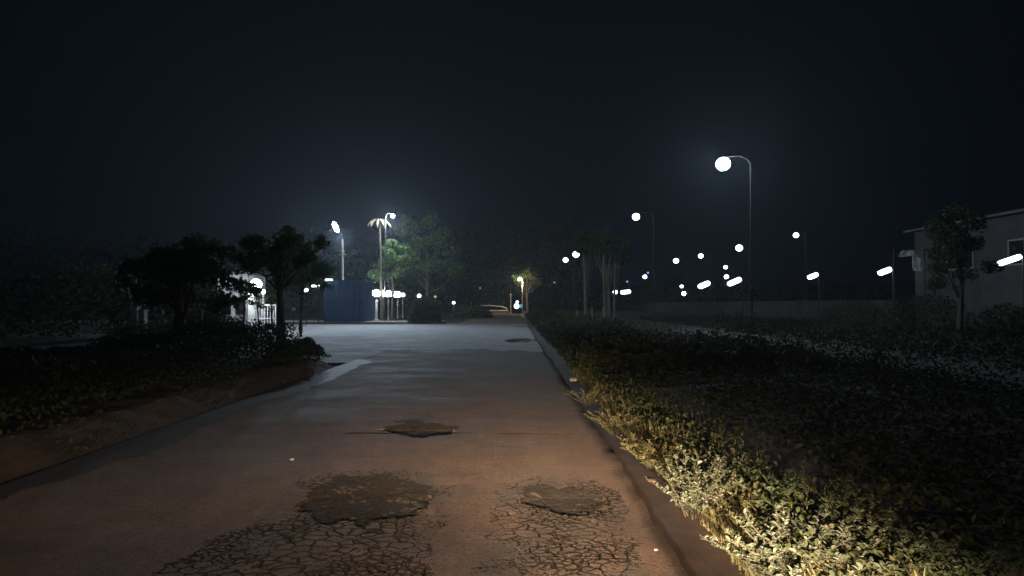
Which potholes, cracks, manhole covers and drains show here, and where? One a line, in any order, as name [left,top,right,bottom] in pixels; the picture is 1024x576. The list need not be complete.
pothole [293,474,439,529]
pothole [511,483,615,520]
pothole [346,416,482,442]
crack [107,460,666,576]
